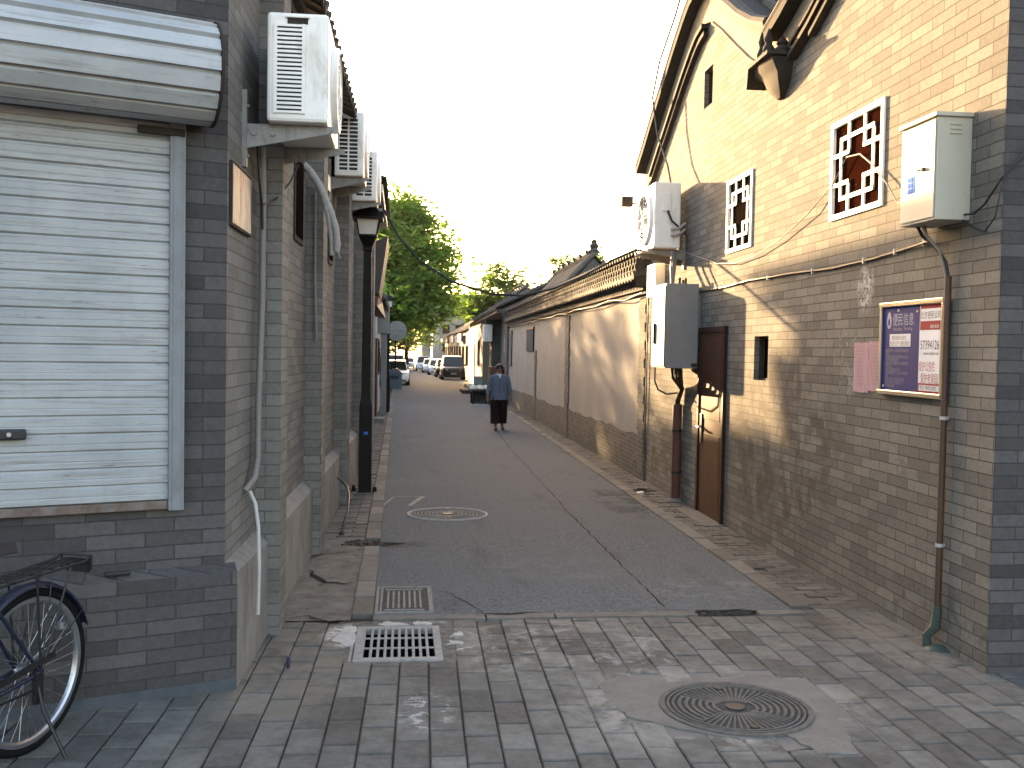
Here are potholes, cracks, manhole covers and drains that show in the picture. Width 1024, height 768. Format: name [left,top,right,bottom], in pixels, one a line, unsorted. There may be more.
crack [481,416,668,610]
pothole [341,540,400,550]
crack [437,590,536,615]
manhole cover [659,681,814,738]
manhole cover [407,507,488,521]
drain grate [348,625,443,666]
